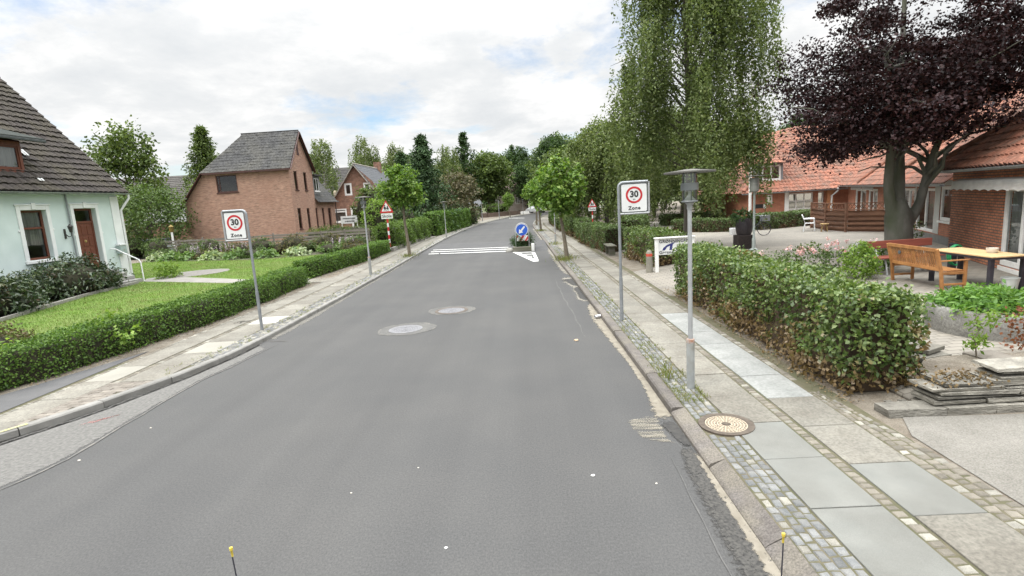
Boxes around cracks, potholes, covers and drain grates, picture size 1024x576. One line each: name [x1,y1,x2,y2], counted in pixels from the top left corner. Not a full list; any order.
manhole cover [698,413,755,437]
manhole cover [428,306,476,315]
manhole cover [378,322,437,336]
